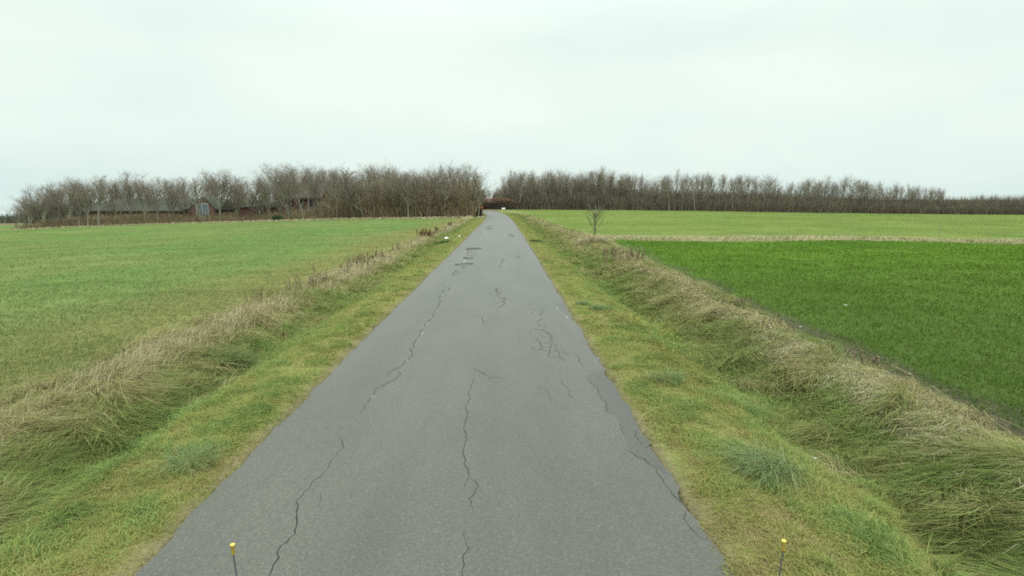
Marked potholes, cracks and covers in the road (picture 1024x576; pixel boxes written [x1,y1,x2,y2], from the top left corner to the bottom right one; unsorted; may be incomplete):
crack [462,368,499,576]
crack [360,251,469,413]
crack [530,306,584,410]
crack [269,438,344,576]
crack [594,386,705,540]
